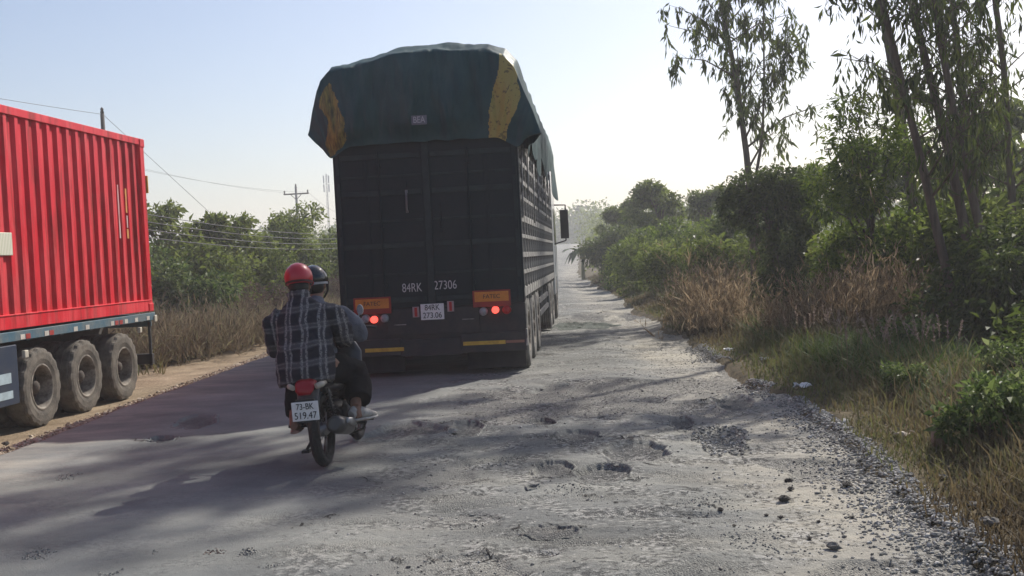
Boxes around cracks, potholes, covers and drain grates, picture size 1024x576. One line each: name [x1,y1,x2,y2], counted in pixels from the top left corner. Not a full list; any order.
pothole [349,419,459,443]
pothole [596,438,676,466]
pothole [531,459,577,479]
pothole [146,435,180,443]
pothole [526,417,560,425]
pothole [515,523,582,542]
pothole [446,418,487,438]
pothole [570,461,636,485]
pothole [668,414,695,433]
